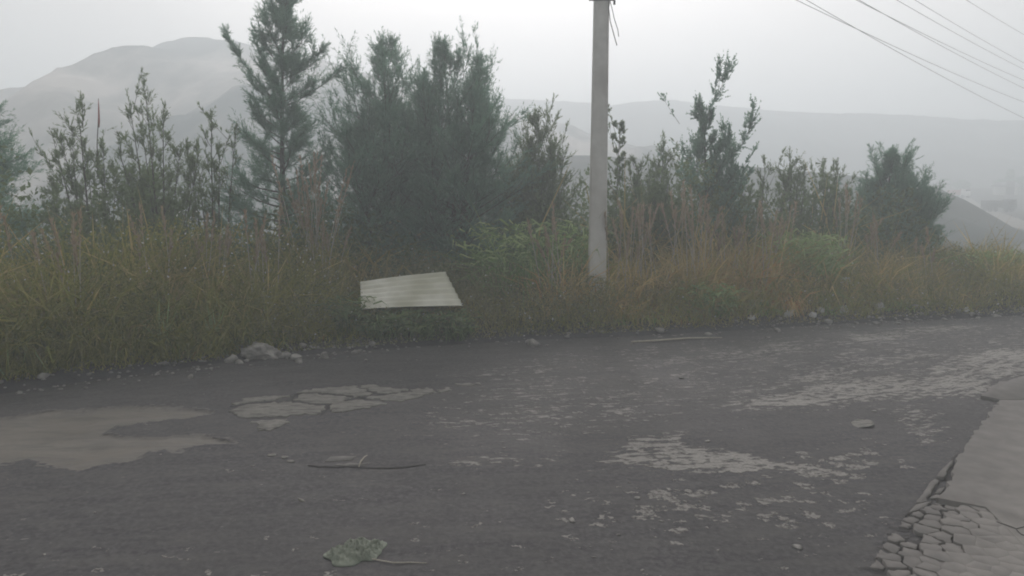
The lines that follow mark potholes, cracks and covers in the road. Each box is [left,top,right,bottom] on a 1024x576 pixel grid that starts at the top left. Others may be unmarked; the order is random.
crack [860,455,958,575]
crack [230,387,409,416]
